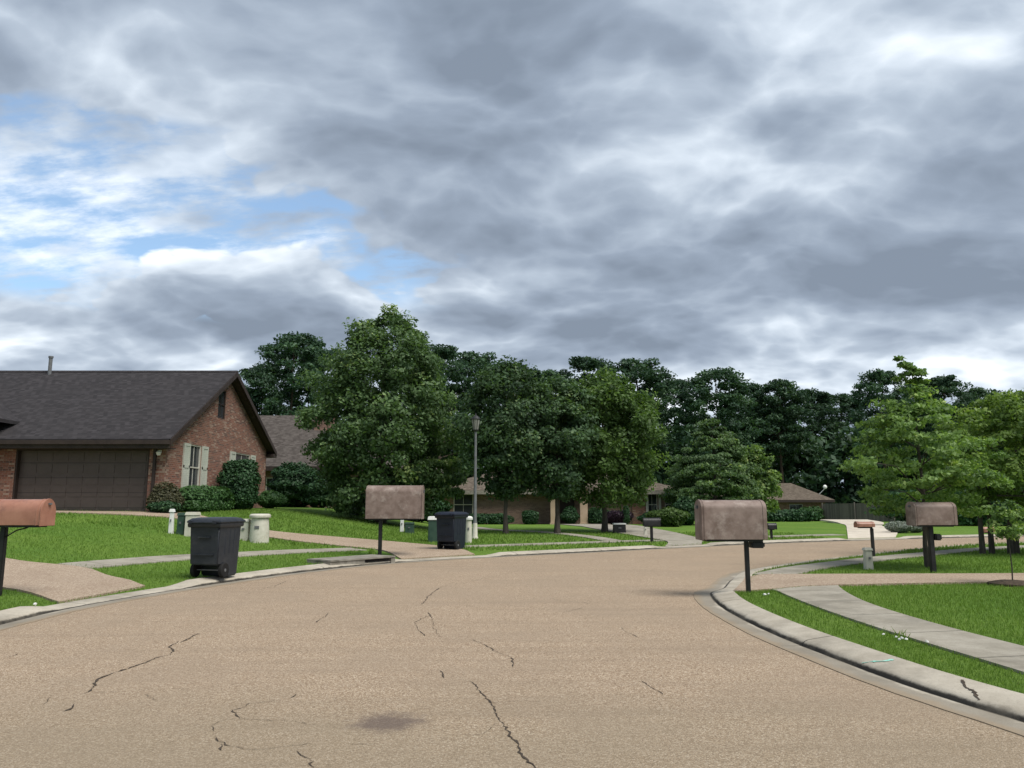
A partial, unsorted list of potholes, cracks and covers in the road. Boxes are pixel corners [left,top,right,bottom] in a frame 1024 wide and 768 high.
crack [471,681,552,768]
crack [212,694,314,767]
crack [45,634,196,711]
